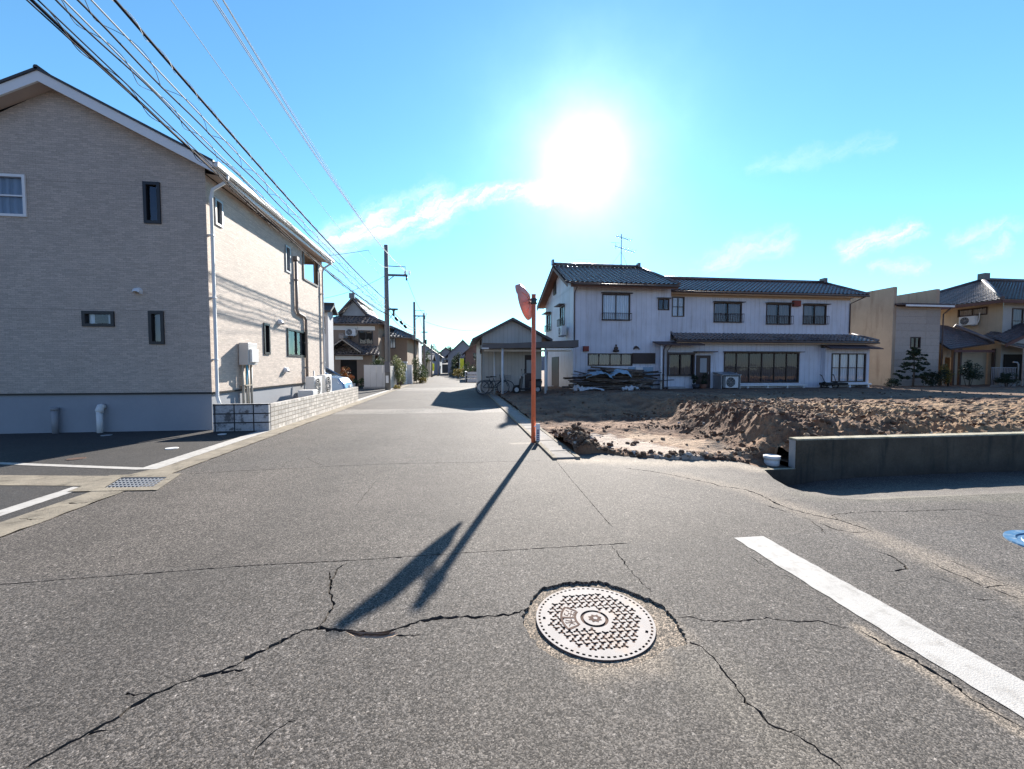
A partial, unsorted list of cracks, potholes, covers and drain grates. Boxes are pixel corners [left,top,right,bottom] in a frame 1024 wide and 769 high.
manhole cover [536,587,656,662]
crack [876,551,908,572]
crack [627,468,1015,536]
drain grate [107,477,166,495]
crack [679,616,842,628]
crack [927,560,1023,601]
crack [690,642,842,769]
crack [24,563,525,769]
